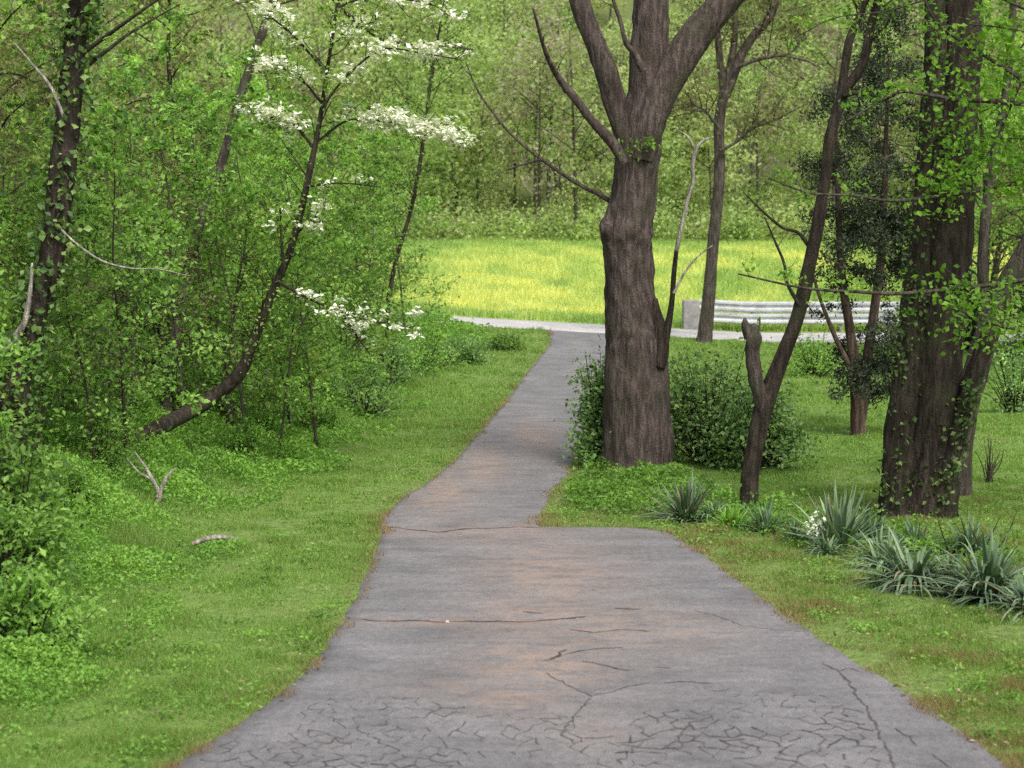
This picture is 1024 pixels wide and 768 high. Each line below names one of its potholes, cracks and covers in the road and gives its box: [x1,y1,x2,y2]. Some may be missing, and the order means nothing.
crack [200,611,951,768]
